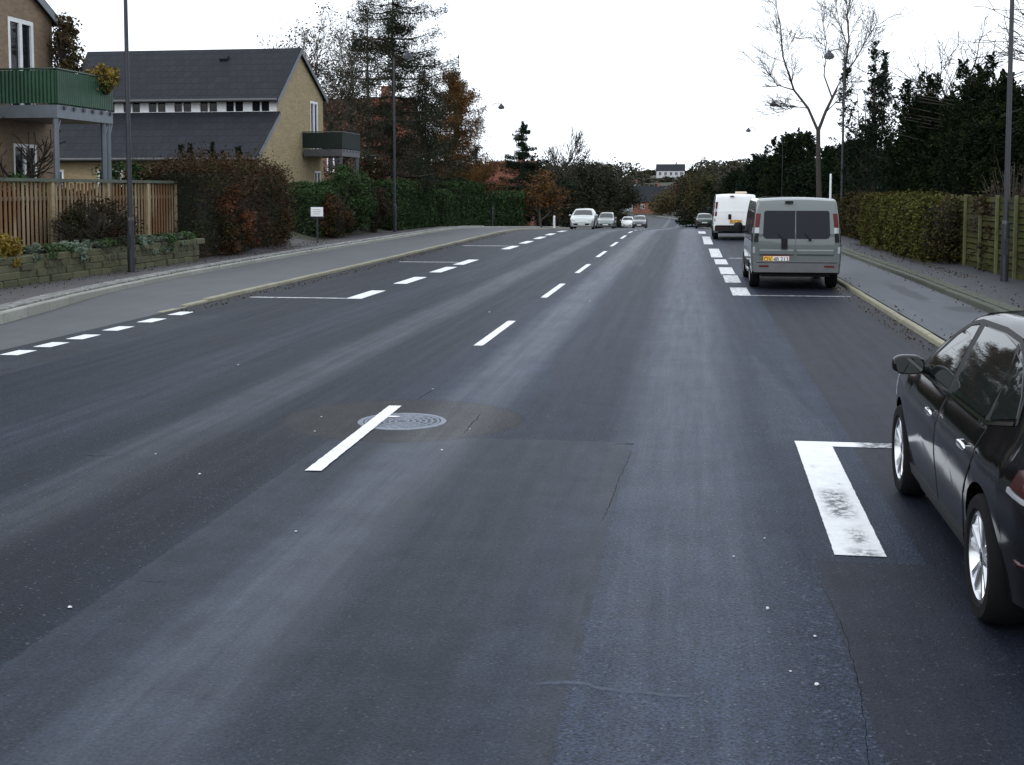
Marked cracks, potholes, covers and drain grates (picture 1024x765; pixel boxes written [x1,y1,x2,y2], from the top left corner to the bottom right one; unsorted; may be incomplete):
crack [536,681,690,697]
manhole cover [357,413,446,430]
crack [816,573,870,765]
